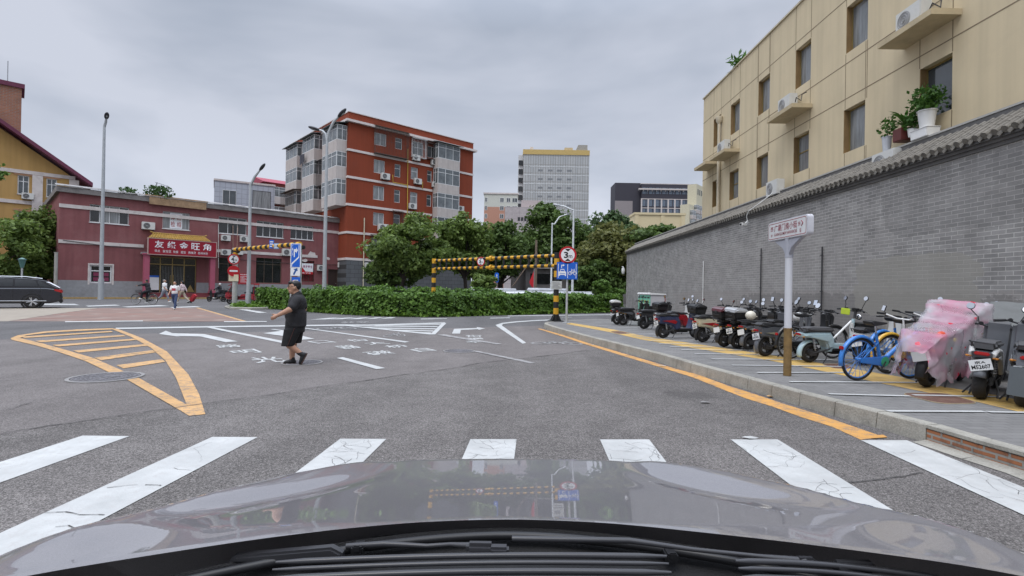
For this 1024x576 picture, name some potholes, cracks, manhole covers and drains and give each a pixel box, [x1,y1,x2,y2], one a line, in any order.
manhole cover [64,372,145,383]
